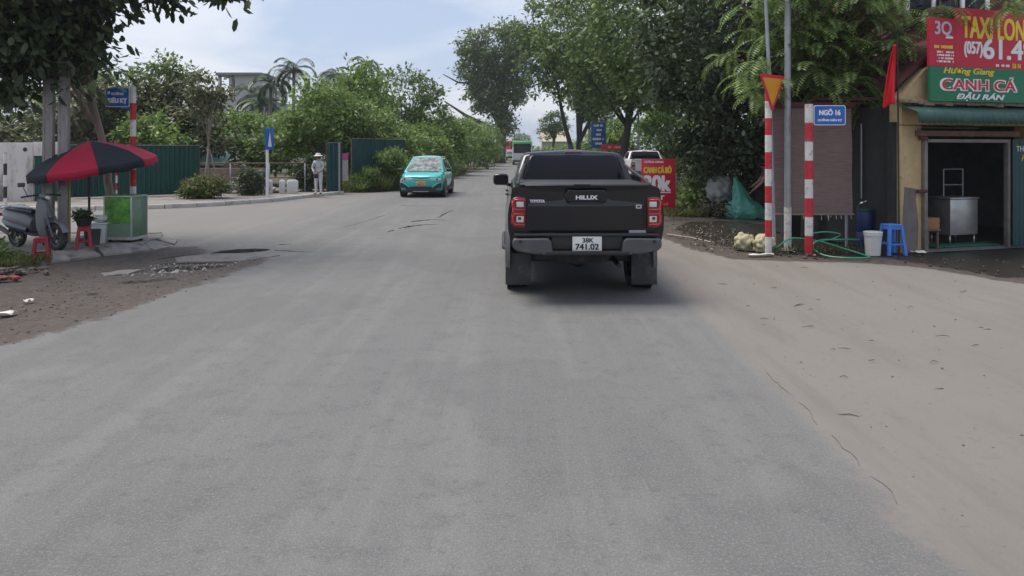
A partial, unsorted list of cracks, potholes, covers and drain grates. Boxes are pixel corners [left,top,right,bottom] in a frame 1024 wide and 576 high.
pothole [154,265,227,273]
crack [346,205,454,232]
crack [767,373,897,503]
